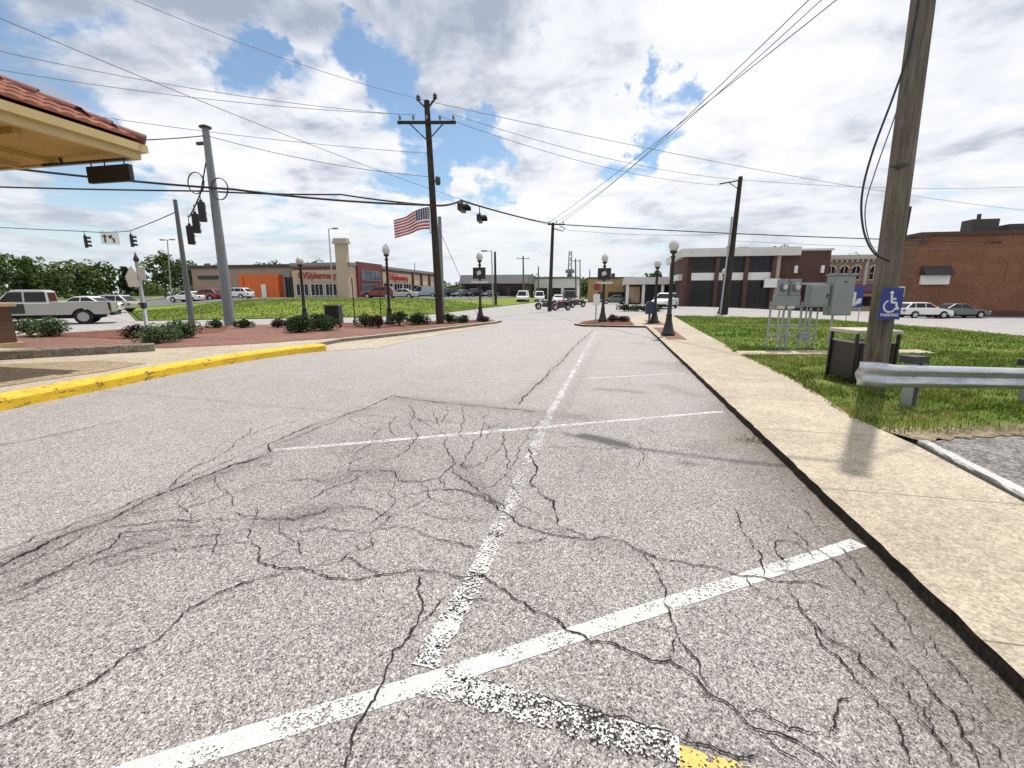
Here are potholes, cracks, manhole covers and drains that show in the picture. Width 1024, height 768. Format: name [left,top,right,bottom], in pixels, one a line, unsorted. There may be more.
crack [0,403,961,768]
